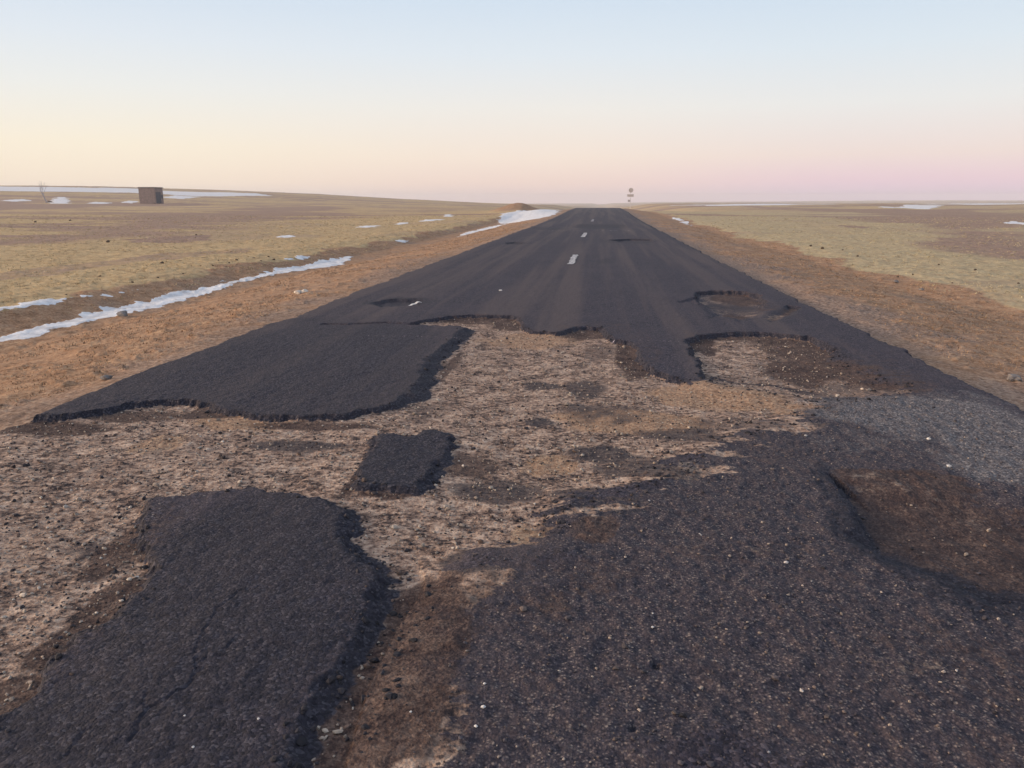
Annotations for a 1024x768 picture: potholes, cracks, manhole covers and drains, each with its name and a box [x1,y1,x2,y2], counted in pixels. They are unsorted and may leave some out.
crack [123,585,260,744]
